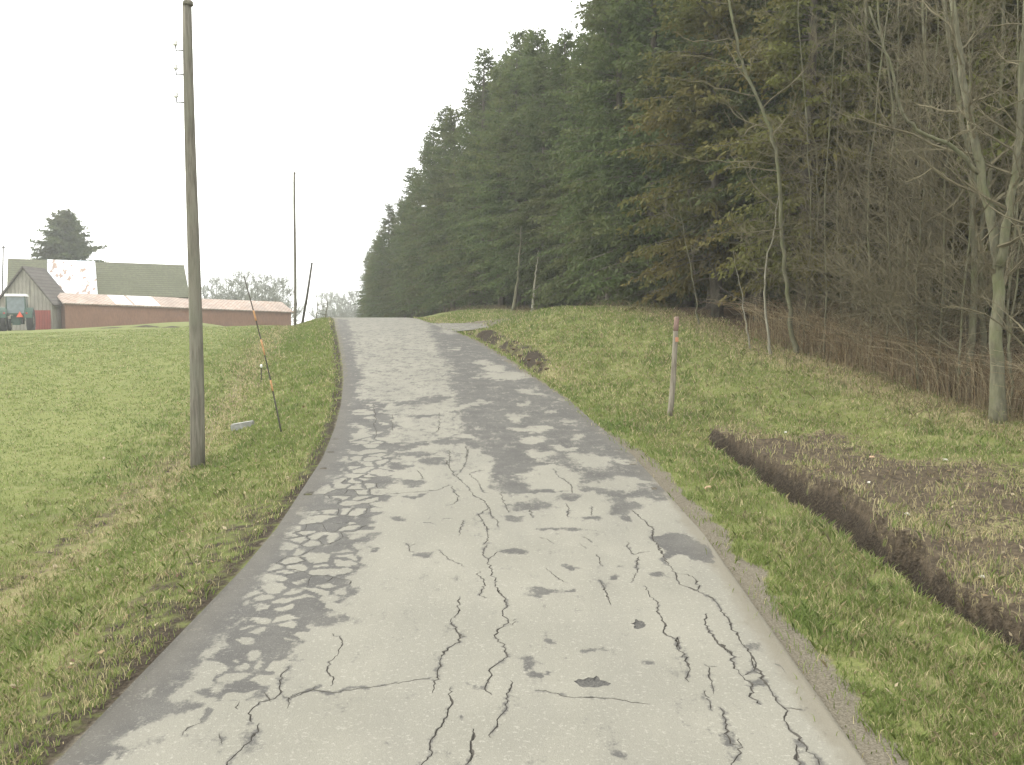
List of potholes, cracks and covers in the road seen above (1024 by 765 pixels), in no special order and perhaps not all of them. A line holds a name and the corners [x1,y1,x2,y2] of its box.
pothole [574,676,611,687]
crack [537,690,644,704]
crack [219,447,515,765]
crack [627,511,820,765]
